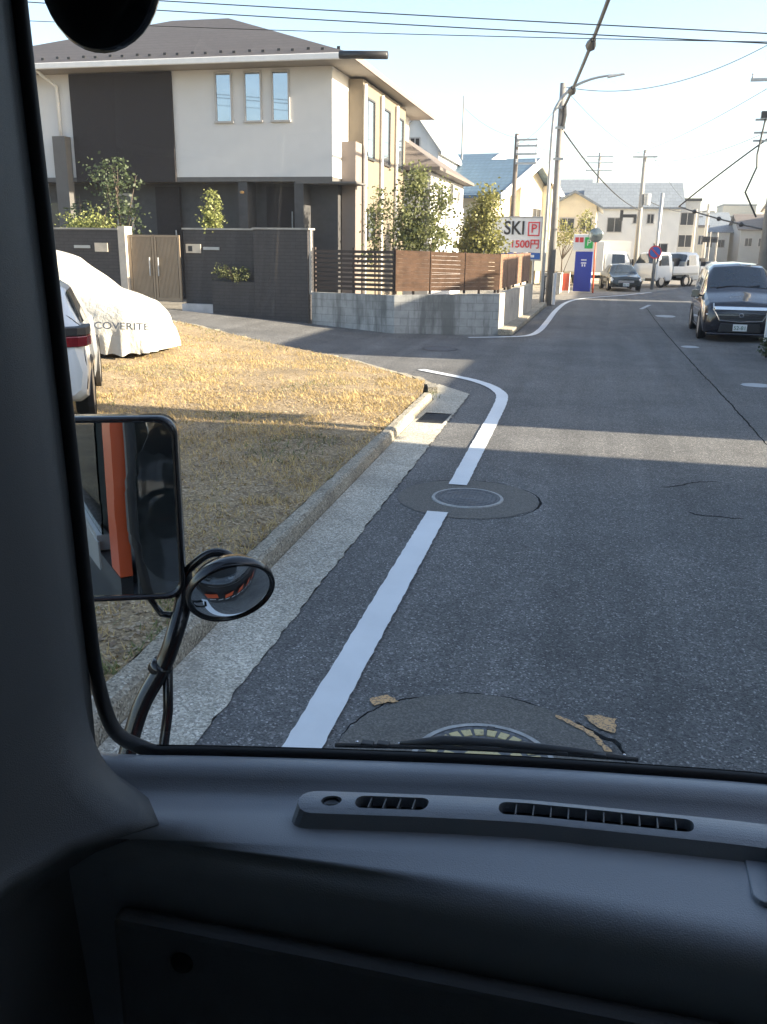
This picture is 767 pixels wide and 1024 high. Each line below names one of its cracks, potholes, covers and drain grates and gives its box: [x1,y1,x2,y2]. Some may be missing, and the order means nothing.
drain grate [416,413,452,424]
manhole cover [412,723,554,758]
manhole cover [432,488,504,508]
